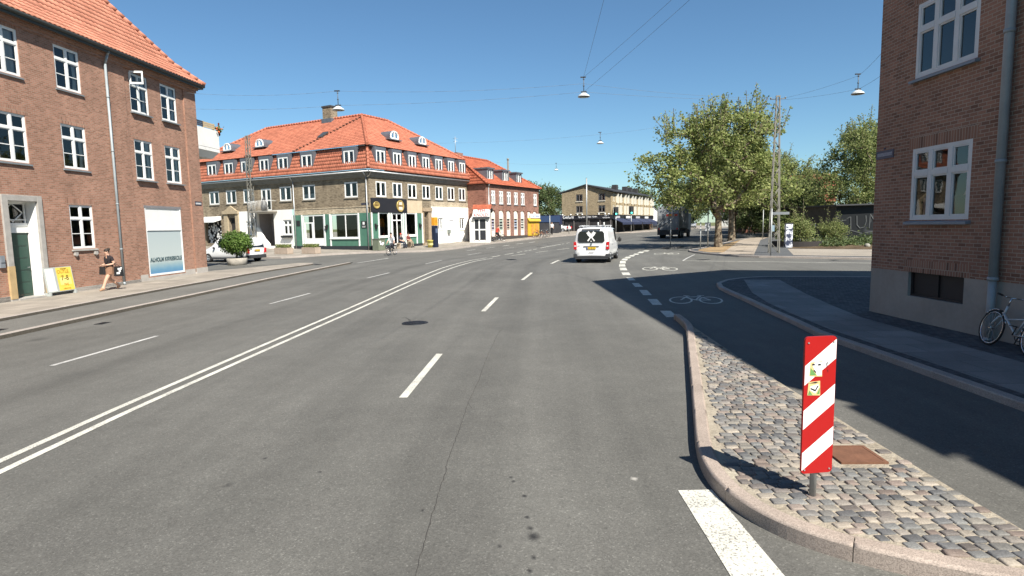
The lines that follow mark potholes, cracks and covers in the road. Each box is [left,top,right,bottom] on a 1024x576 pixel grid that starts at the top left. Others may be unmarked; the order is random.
crack [415,332,499,576]
utility cover [832,445,889,464]
